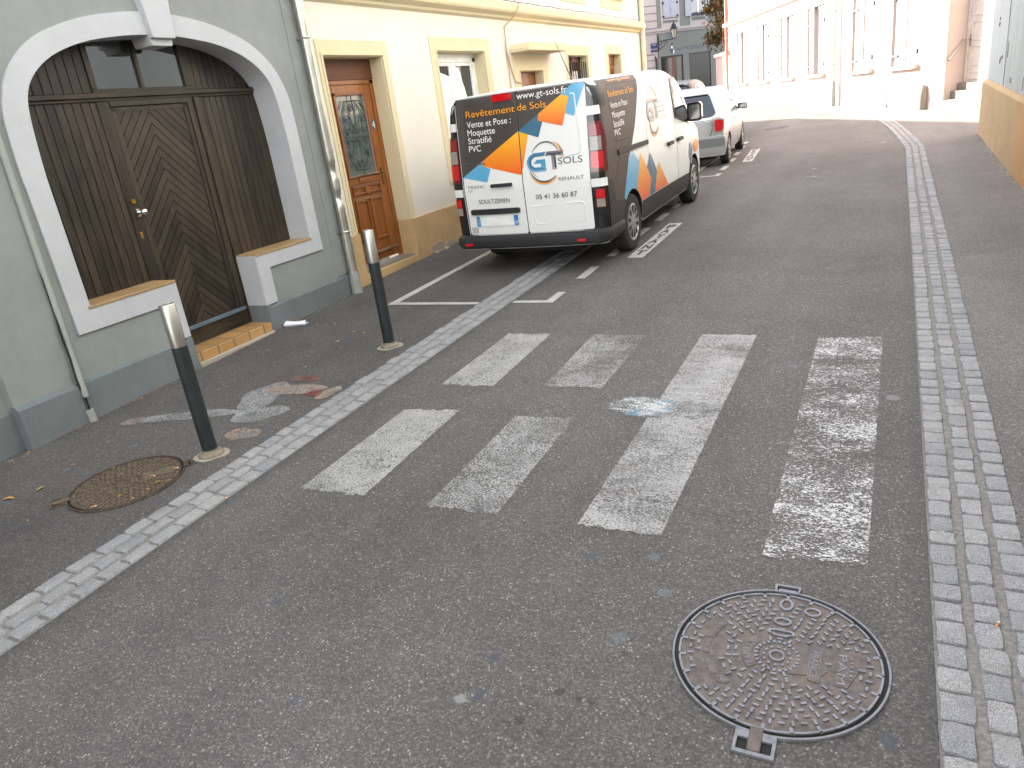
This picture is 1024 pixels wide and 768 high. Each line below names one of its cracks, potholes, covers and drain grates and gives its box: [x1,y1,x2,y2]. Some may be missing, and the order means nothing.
manhole cover [672,583,892,763]
manhole cover [49,455,193,513]
